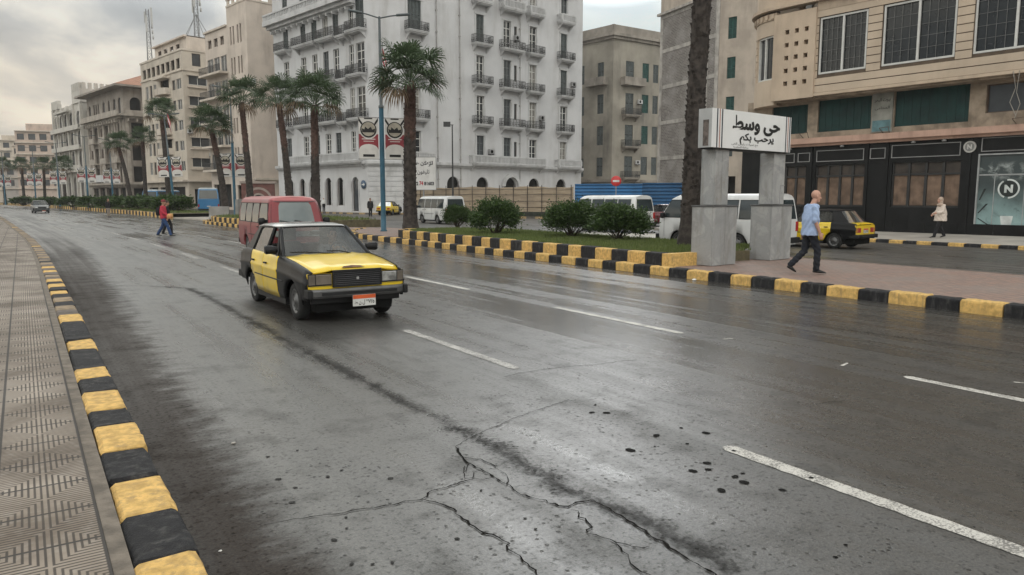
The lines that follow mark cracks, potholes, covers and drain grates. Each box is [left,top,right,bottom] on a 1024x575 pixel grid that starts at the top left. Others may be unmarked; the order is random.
crack [264,400,741,575]
